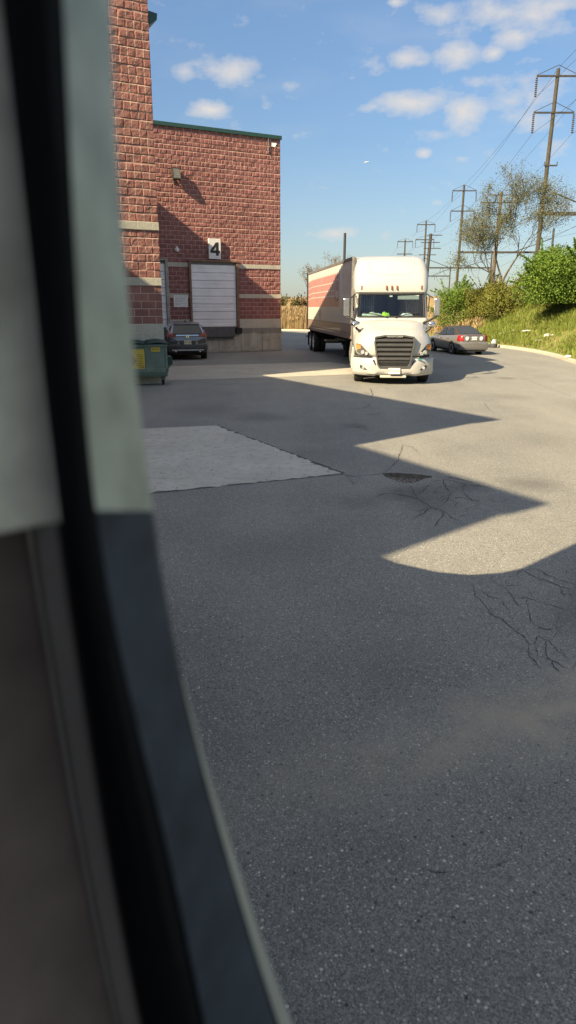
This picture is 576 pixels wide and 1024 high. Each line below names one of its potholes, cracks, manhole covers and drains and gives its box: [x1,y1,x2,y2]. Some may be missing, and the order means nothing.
crack [344,444,418,484]
pothole [381,473,432,483]
crack [473,569,576,672]
crack [378,477,507,527]
